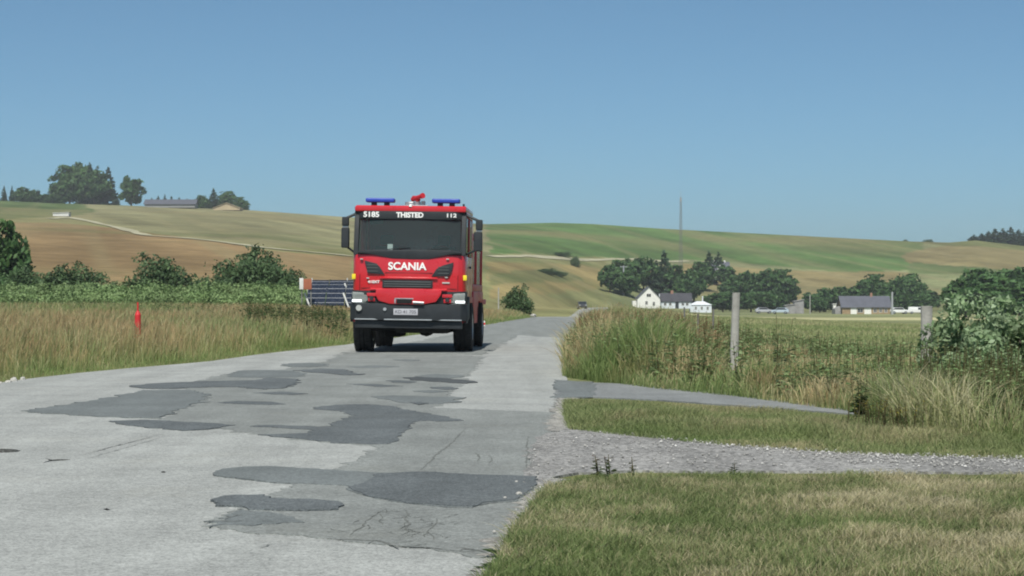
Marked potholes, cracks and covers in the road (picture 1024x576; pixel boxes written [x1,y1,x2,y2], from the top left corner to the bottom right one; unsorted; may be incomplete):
crack [315,510,485,552]
